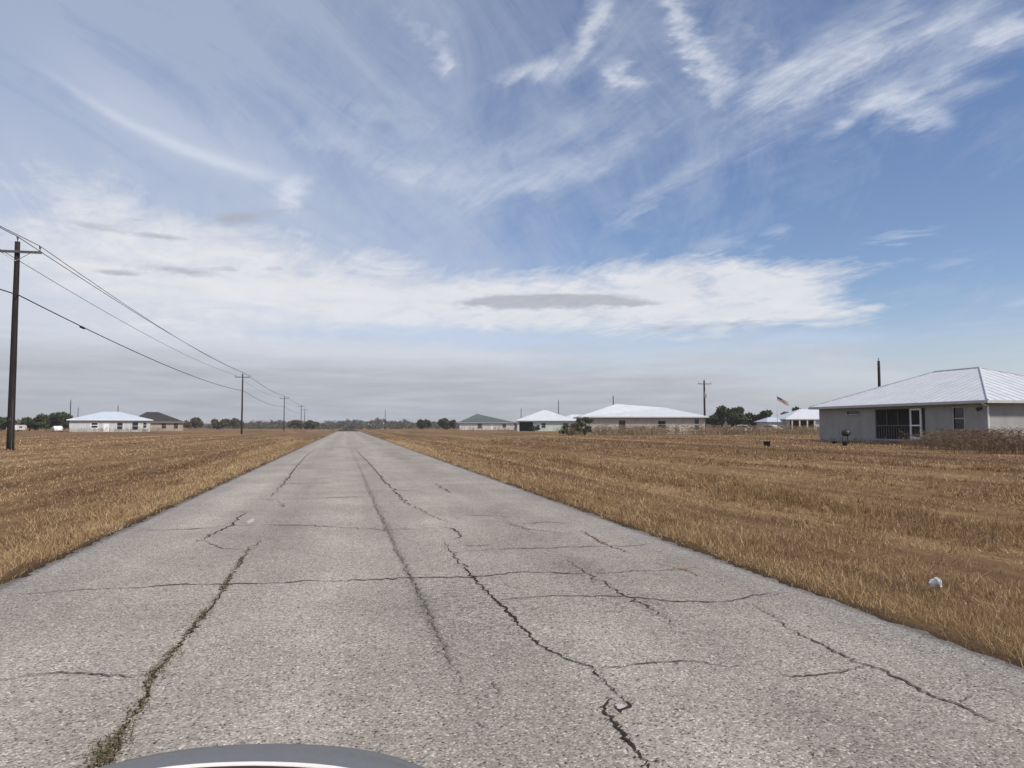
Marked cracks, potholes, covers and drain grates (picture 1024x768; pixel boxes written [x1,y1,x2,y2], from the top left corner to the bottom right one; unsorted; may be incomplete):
crack [6,450,1022,768]
